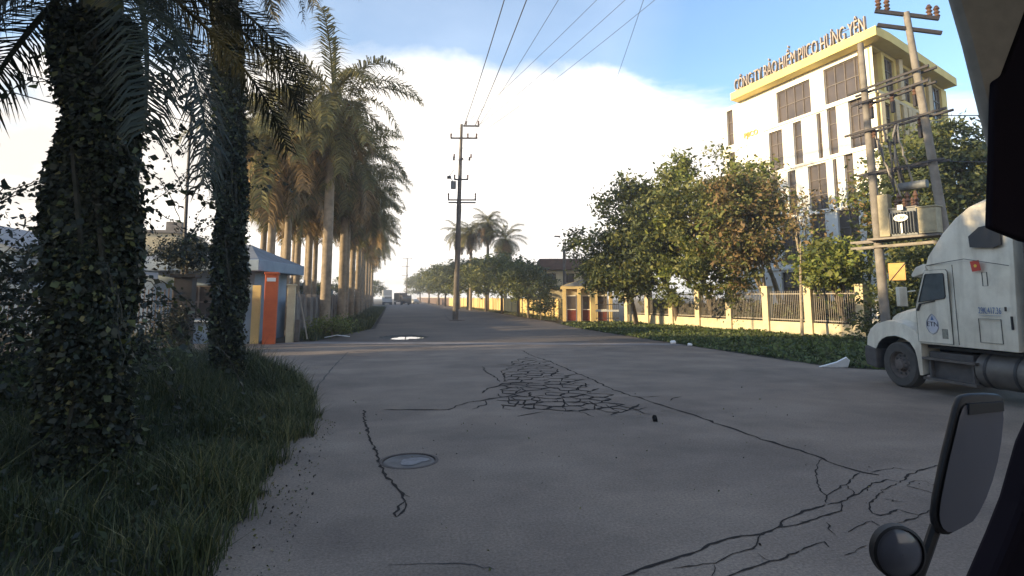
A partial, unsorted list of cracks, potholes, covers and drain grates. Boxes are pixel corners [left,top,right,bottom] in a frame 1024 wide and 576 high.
crack [362,350,938,576]
manhole cover [379,453,439,469]
